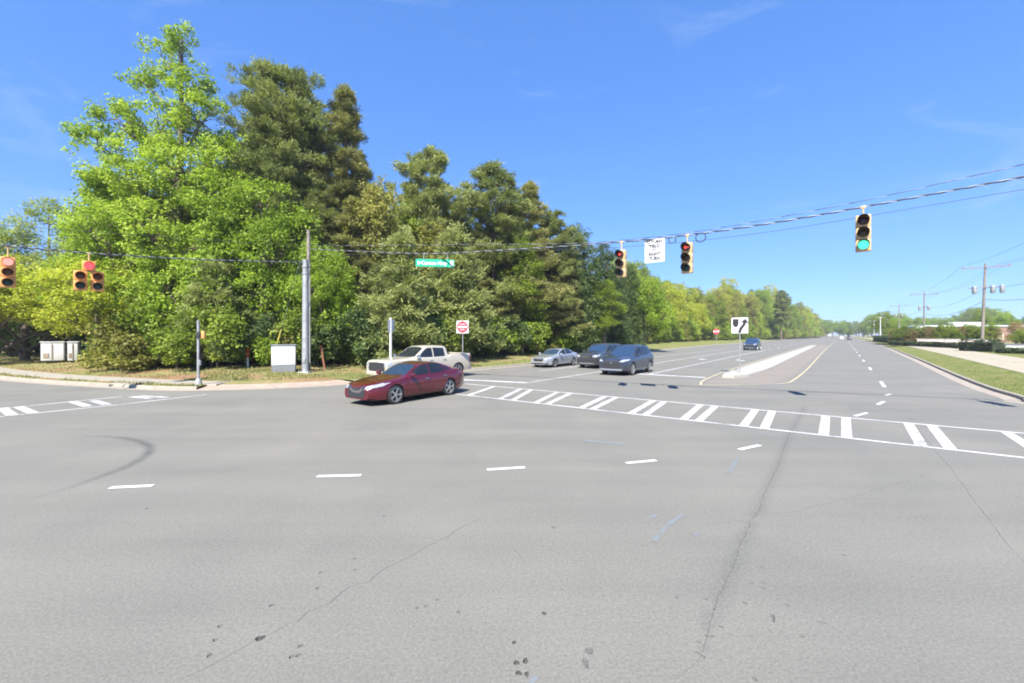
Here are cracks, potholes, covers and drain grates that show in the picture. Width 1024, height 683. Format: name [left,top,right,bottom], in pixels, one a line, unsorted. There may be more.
crack [184,516,487,678]
